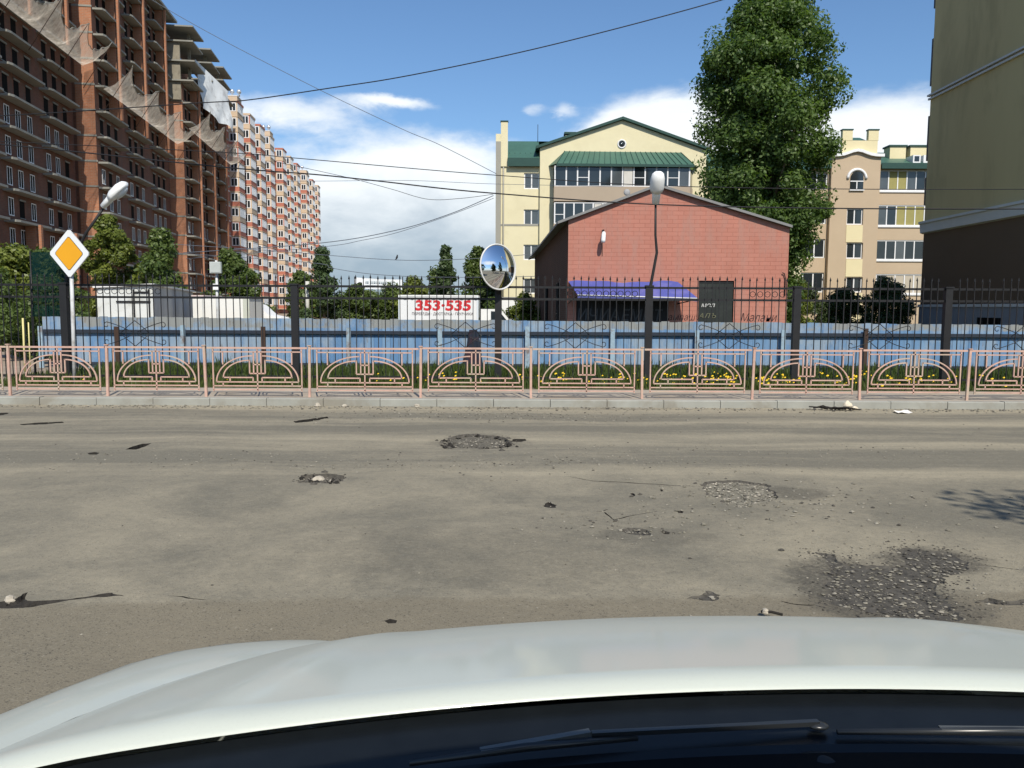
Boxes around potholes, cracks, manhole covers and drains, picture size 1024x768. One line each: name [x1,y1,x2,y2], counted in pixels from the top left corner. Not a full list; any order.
pothole [435,433,518,451]
pothole [701,480,778,508]
pothole [292,470,347,485]
pothole [815,548,969,622]
pothole [622,528,651,536]
